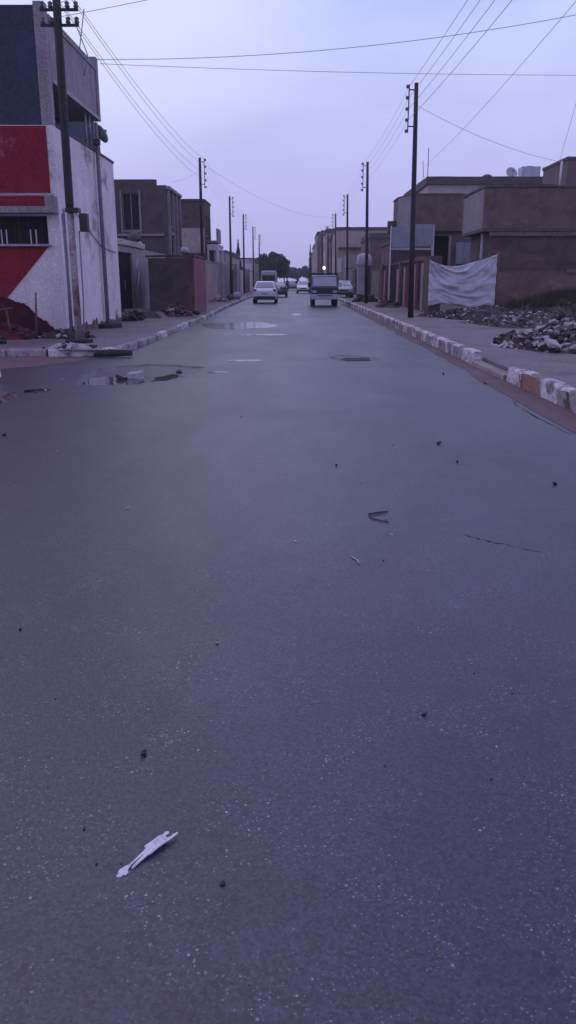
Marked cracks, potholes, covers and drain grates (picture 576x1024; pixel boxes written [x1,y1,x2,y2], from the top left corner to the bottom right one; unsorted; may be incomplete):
pothole [76,364,205,385]
crack [461,533,544,553]
